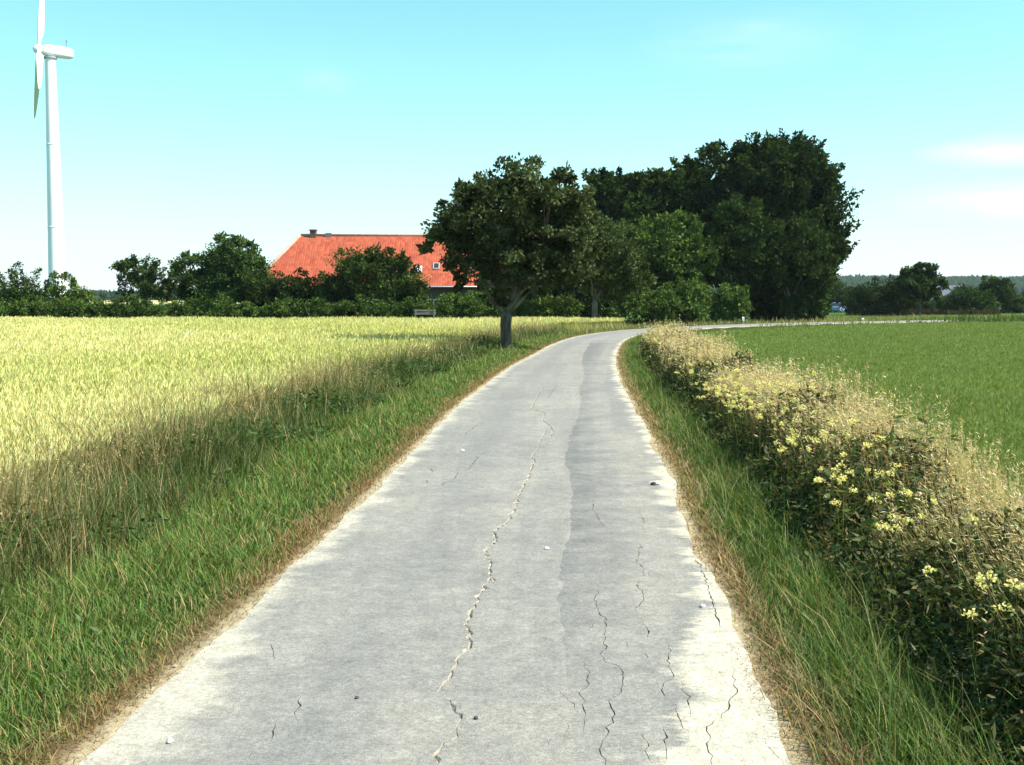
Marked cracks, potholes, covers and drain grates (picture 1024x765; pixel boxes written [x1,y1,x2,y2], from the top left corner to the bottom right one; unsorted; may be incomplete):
crack [635,543,738,765]
crack [432,381,555,765]
crack [548,590,624,765]
